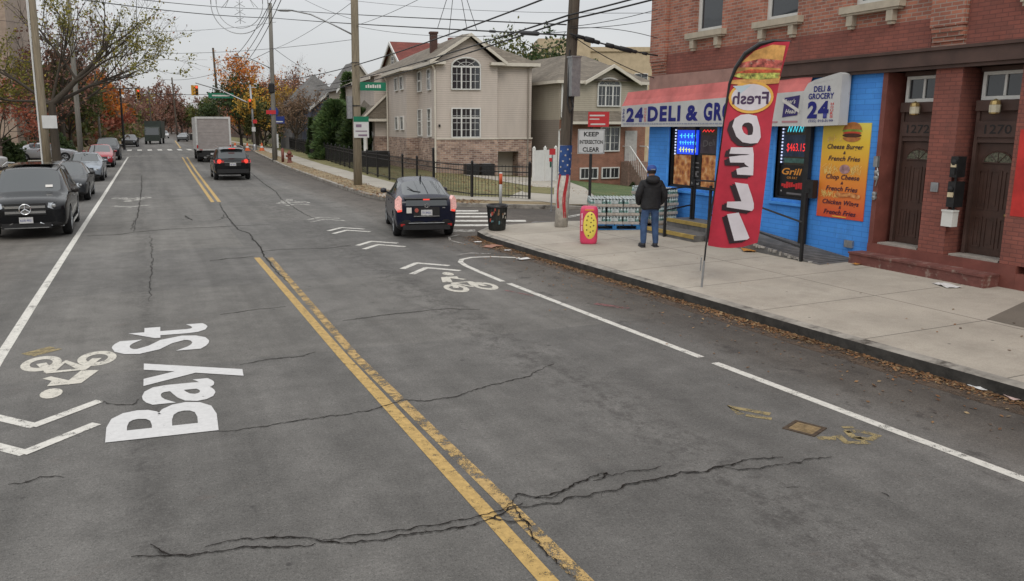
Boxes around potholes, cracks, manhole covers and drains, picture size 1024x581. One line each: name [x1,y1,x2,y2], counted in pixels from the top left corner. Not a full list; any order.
crack [208,364,553,432]
crack [94,178,350,281]
manhole cover [782,420,827,437]
crack [131,455,831,580]
